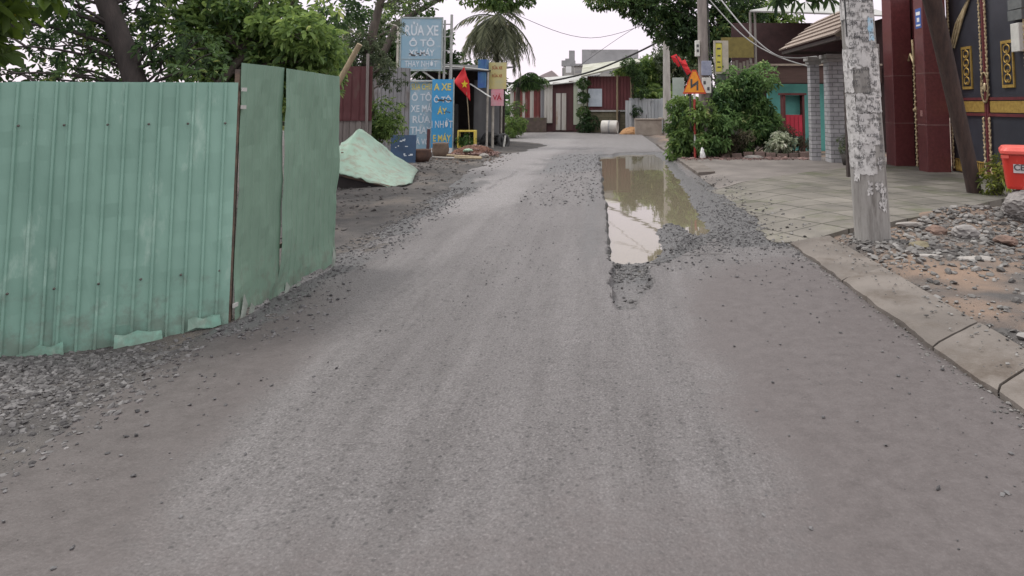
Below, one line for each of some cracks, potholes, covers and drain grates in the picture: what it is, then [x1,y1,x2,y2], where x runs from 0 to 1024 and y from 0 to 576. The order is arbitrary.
pothole [607,263,656,310]
pothole [598,151,729,270]
